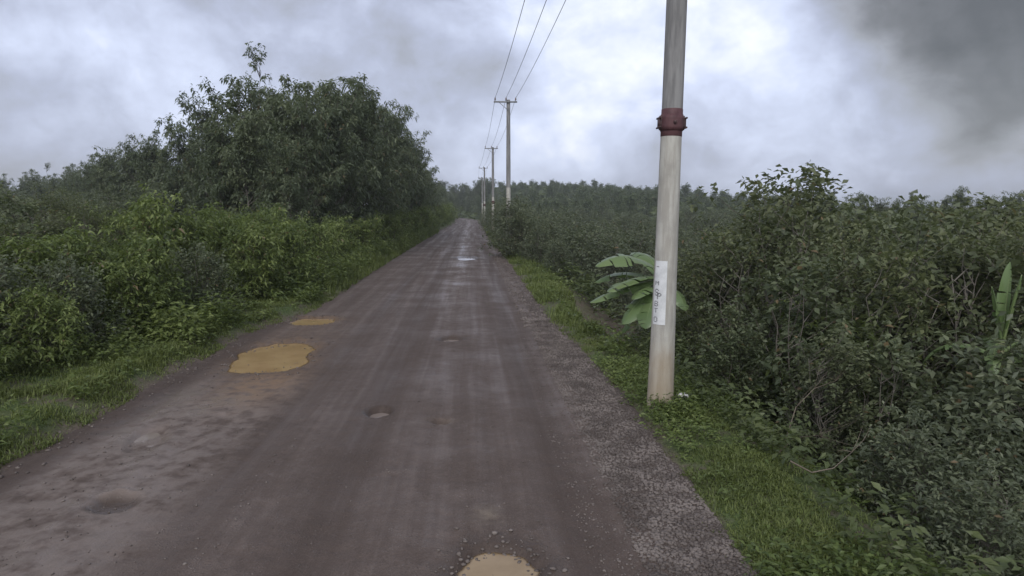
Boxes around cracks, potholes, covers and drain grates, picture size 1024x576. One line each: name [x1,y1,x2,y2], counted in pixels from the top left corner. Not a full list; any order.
pothole [79,488,149,517]
pothole [361,404,396,418]
pothole [119,423,172,455]
pothole [433,536,557,576]
